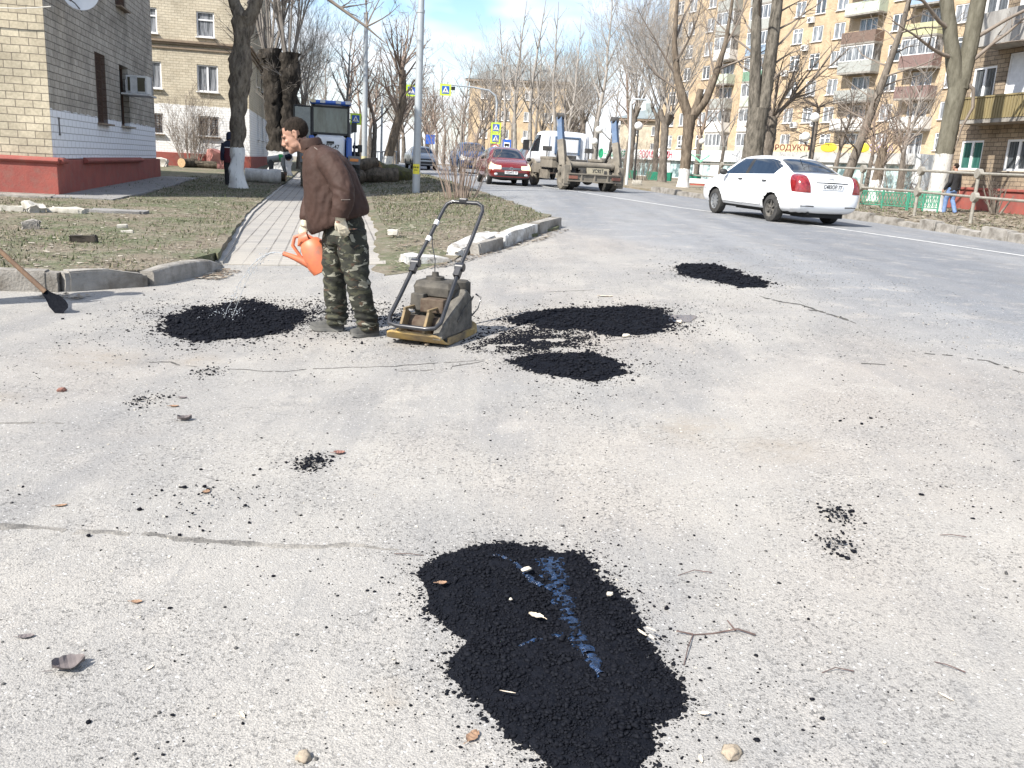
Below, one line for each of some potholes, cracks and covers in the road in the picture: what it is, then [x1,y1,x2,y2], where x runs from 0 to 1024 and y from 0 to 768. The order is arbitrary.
crack [861,351,1023,373]
crack [761,296,855,323]
crack [149,360,483,372]
